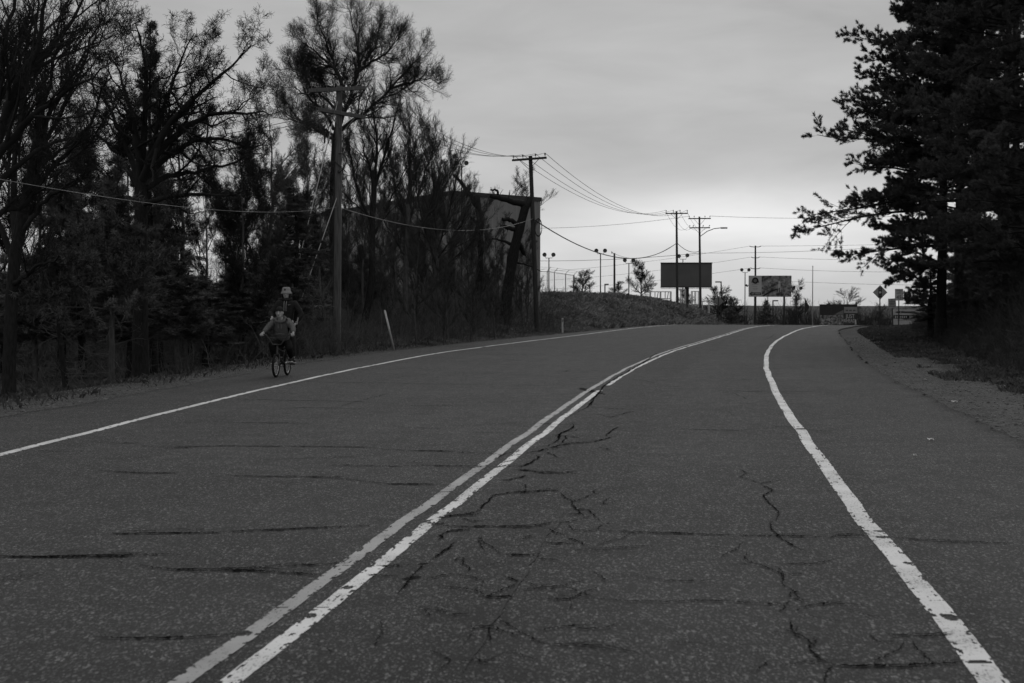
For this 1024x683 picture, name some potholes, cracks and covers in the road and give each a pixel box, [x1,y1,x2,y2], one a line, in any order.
crack [4,353,997,681]
